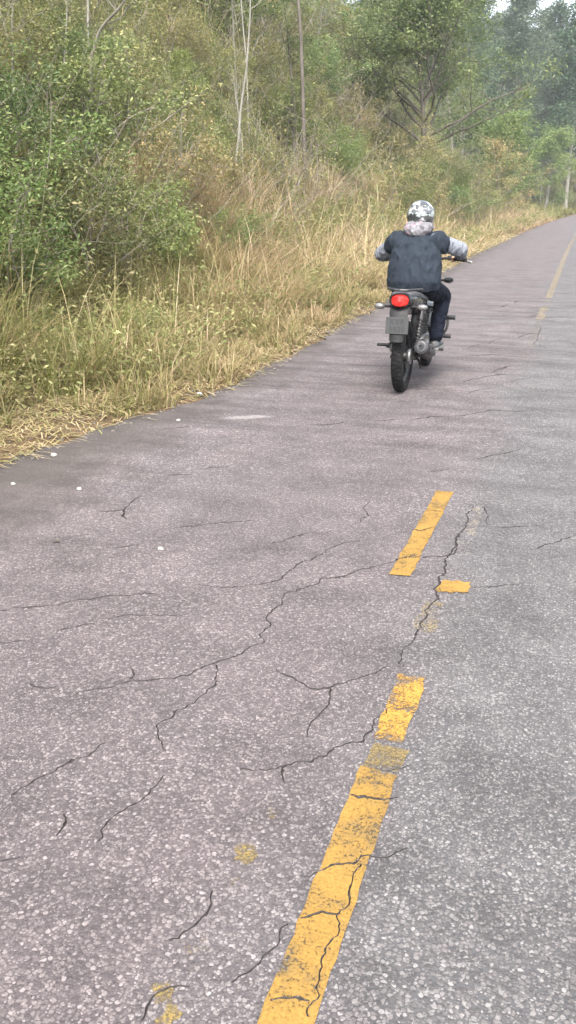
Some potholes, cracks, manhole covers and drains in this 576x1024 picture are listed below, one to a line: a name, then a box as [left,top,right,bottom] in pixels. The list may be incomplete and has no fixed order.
crack [240,507,573,801]
crack [169,892,212,941]
crack [381,410,533,421]
crack [101,496,140,519]
crack [464,301,540,393]
crack [96,775,164,843]
crack [76,530,395,754]
crack [232,847,408,1017]
crack [1,592,182,631]
crack [11,743,104,803]
